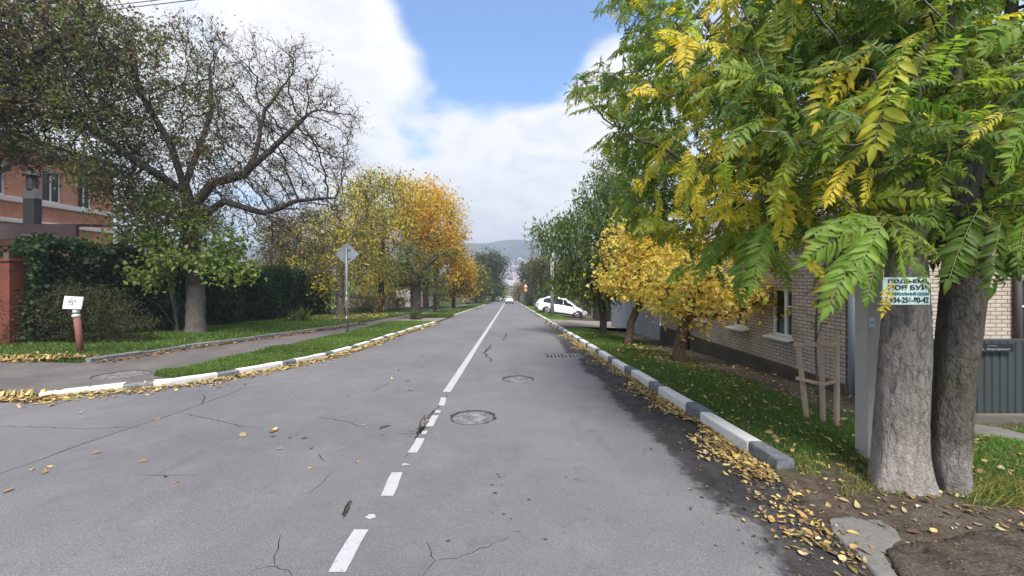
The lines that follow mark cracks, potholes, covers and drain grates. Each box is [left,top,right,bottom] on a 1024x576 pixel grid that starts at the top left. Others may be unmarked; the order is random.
manhole cover [502,375,534,383]
manhole cover [90,370,152,379]
crack [423,531,519,575]
crack [246,534,293,576]
crack [0,387,252,474]
crack [401,396,447,458]
manhole cover [450,410,497,425]
